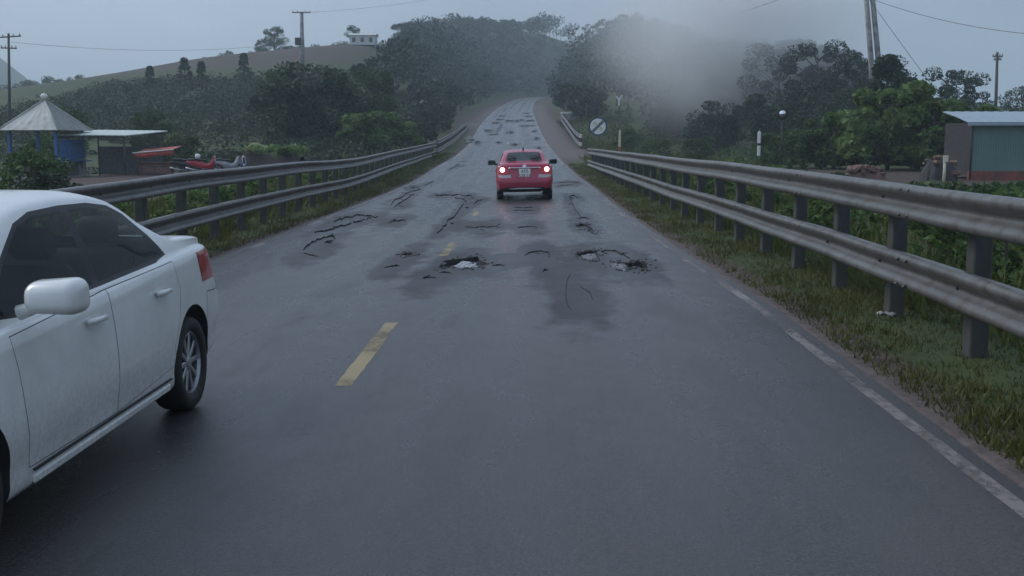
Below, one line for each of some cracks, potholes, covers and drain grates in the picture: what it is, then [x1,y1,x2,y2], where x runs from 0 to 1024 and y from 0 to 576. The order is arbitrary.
pothole [602,258,657,274]
crack [559,181,590,219]
pothole [428,253,496,271]
crack [303,164,538,257]
pothole [571,247,604,263]
